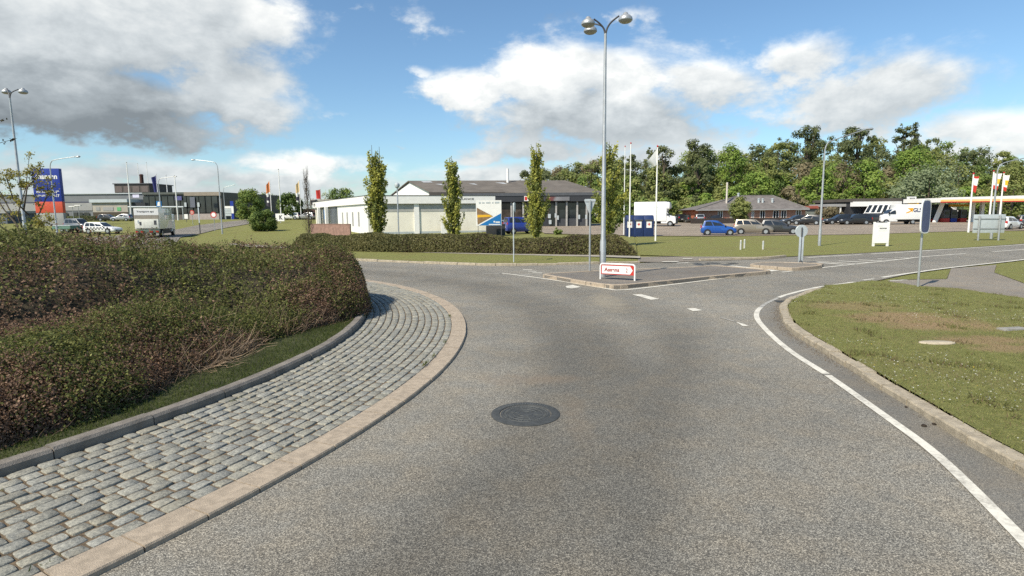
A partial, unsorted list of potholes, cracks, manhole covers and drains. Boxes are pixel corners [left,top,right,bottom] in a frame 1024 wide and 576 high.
manhole cover [491,402,560,427]
